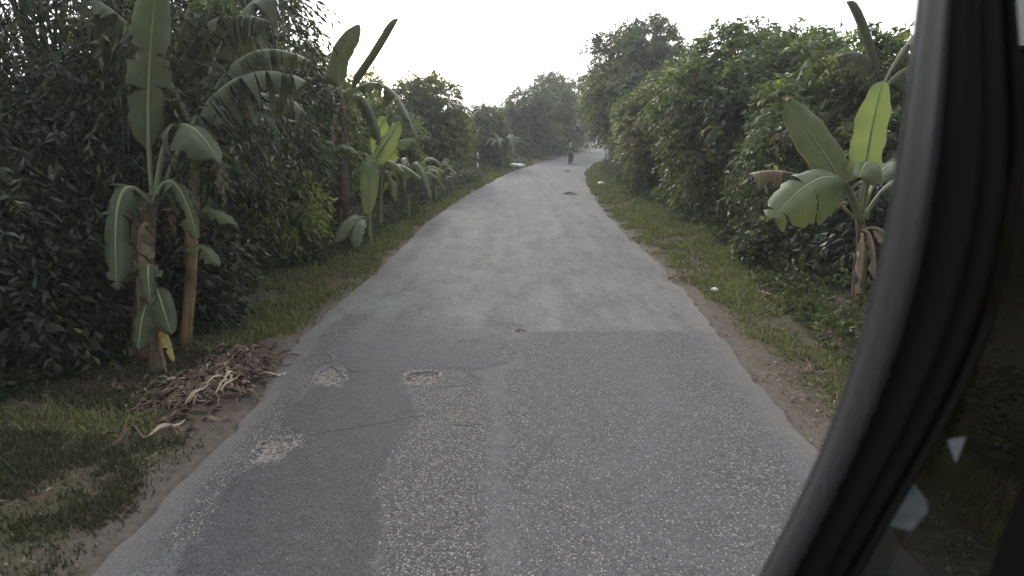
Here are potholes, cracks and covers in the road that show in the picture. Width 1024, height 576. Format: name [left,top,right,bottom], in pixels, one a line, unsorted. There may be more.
crack [299,415,421,438]
pothole [311,364,348,386]
pothole [402,369,444,385]
pothole [243,435,302,464]
